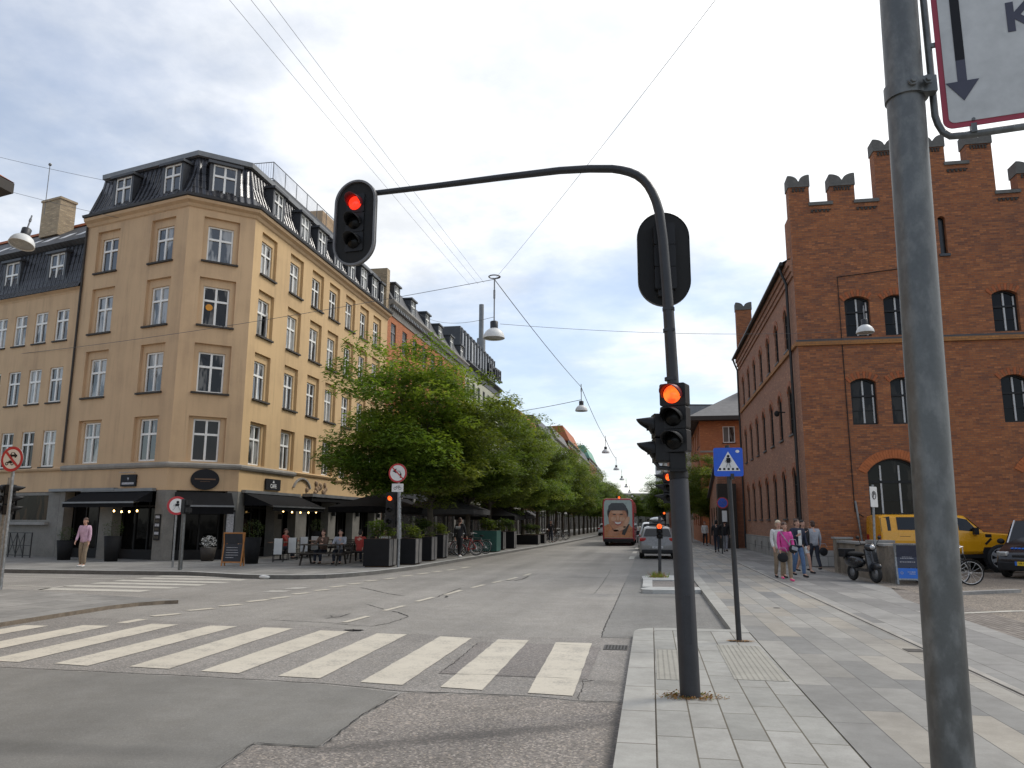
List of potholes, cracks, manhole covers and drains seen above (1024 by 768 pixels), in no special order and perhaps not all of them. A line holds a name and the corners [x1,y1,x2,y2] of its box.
crack [283,588,408,628]
